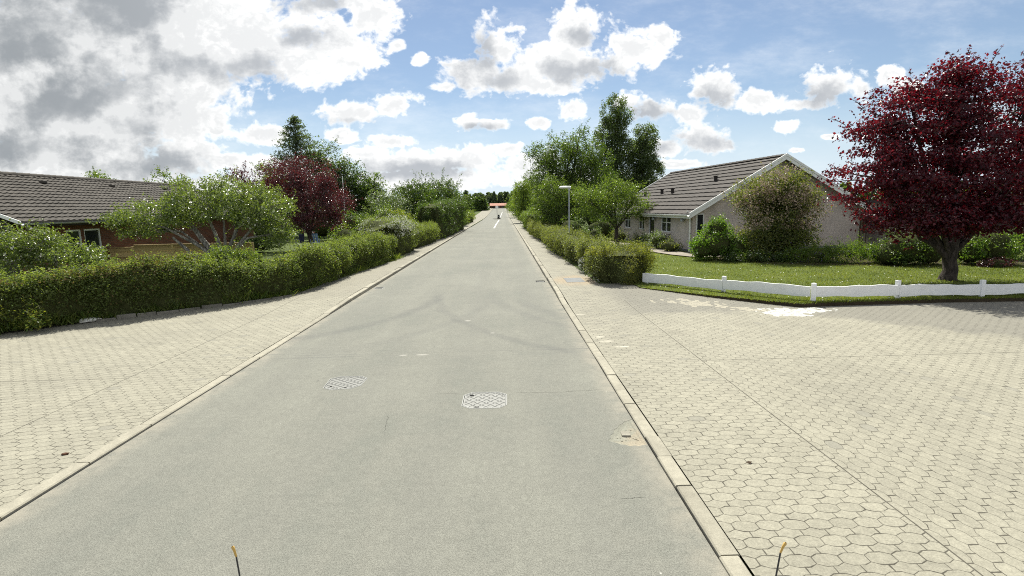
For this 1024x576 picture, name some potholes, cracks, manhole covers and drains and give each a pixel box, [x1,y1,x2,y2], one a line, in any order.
manhole cover [461,392,507,409]
manhole cover [323,376,367,390]
